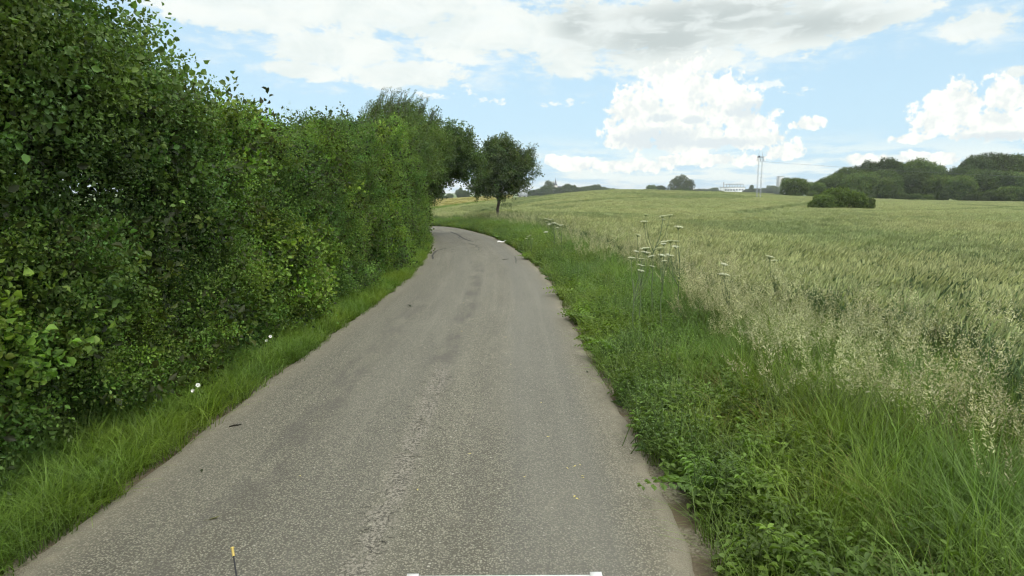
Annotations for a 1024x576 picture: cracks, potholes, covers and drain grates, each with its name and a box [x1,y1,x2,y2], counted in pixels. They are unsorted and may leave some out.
crack [431,229,479,259]
